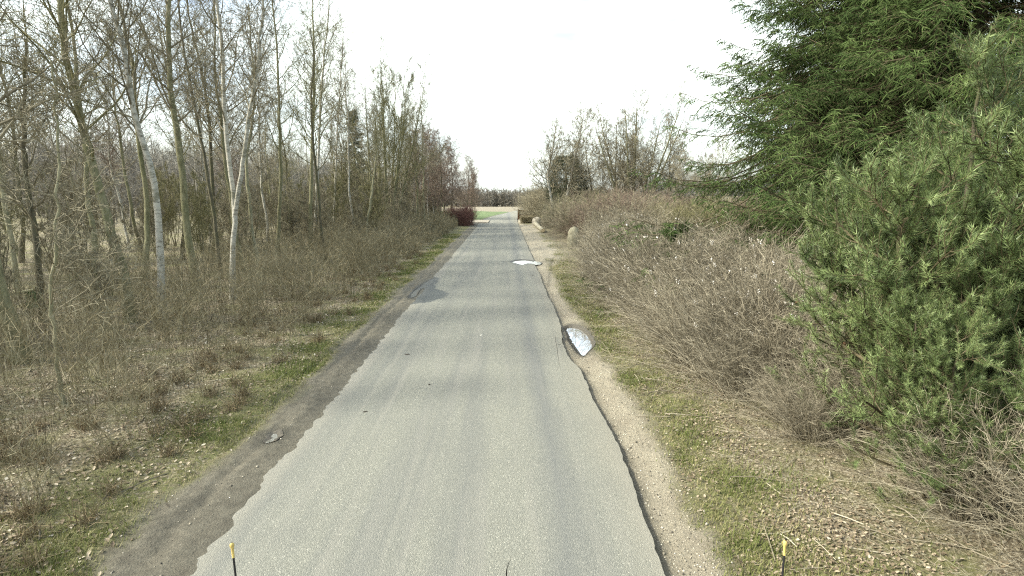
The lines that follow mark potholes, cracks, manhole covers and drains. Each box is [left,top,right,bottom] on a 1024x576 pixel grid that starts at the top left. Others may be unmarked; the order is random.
pothole [563,324,596,357]
